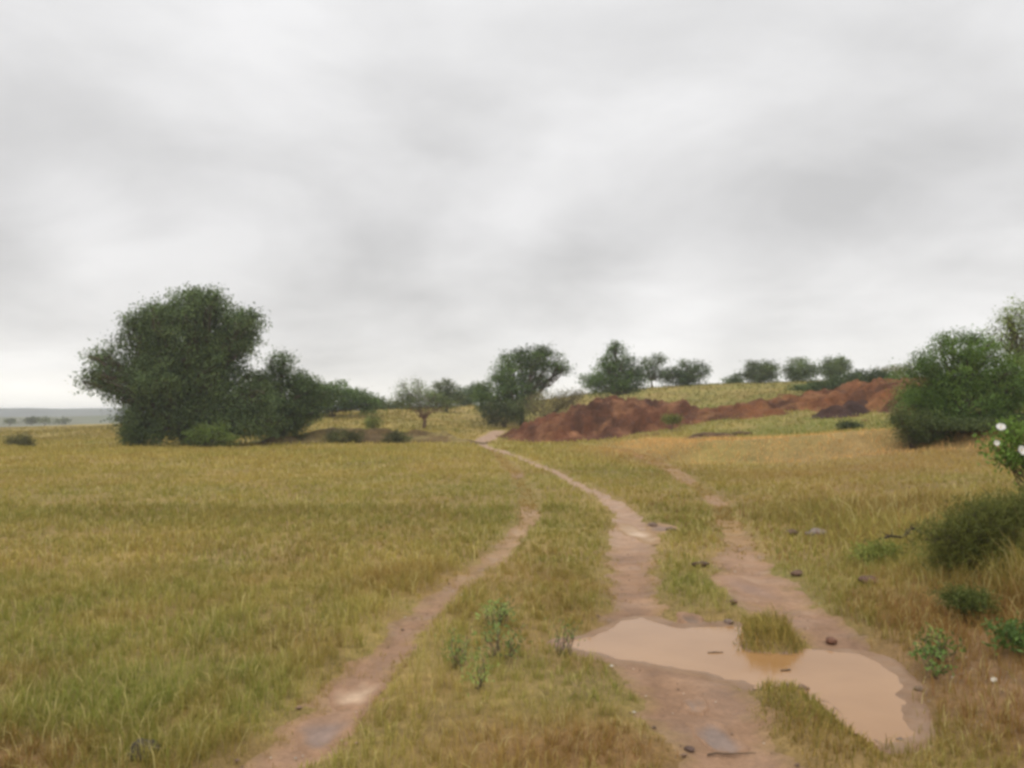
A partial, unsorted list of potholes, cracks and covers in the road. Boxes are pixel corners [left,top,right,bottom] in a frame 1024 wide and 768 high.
pothole [547,616,935,754]
